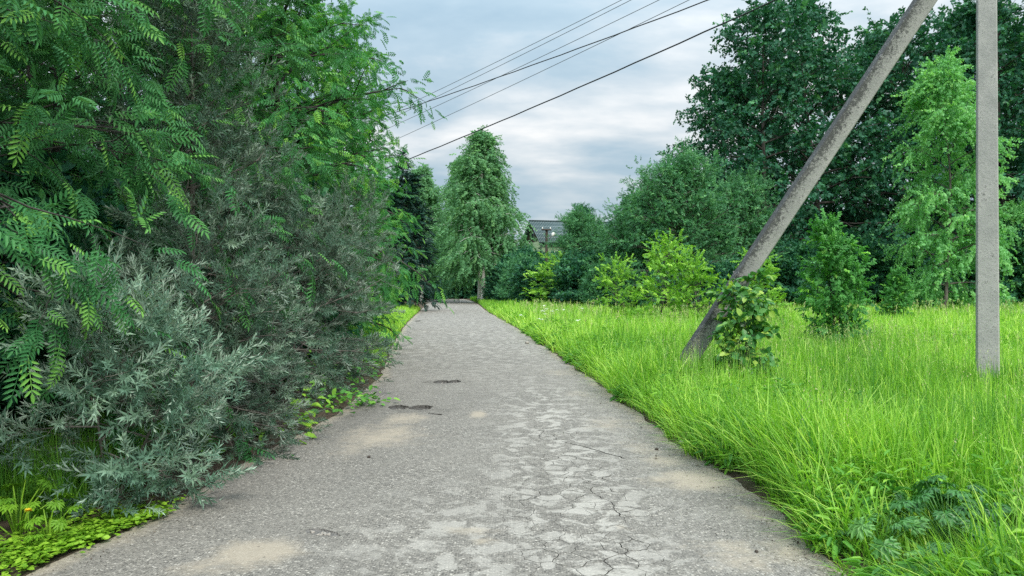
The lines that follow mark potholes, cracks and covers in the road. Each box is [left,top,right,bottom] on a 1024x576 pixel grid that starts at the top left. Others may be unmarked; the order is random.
crack [501,429,671,576]
